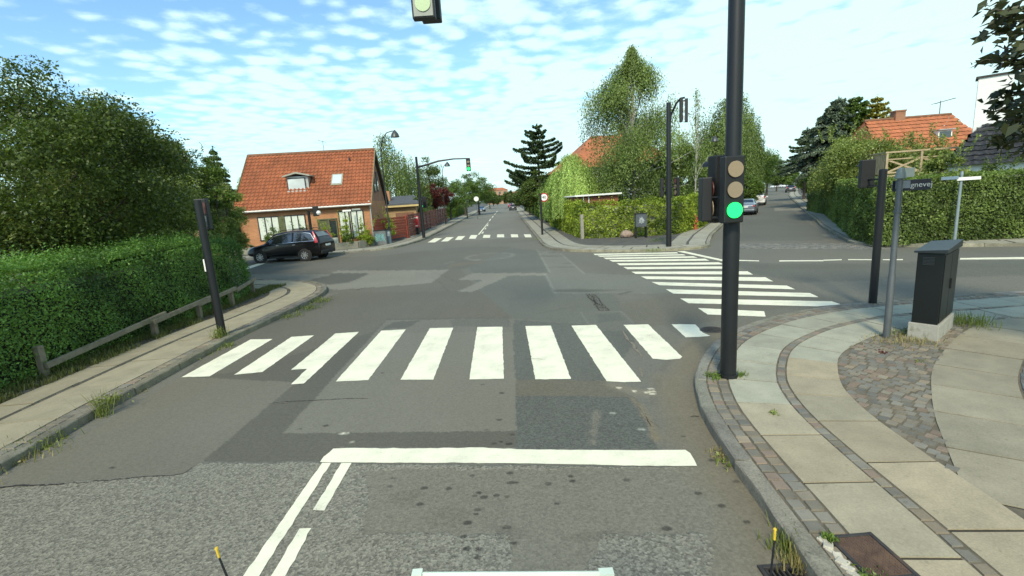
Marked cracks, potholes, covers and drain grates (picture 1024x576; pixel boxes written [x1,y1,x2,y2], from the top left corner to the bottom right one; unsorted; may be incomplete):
drain grate [757,563,808,576]
manhole cover [826,532,920,576]
